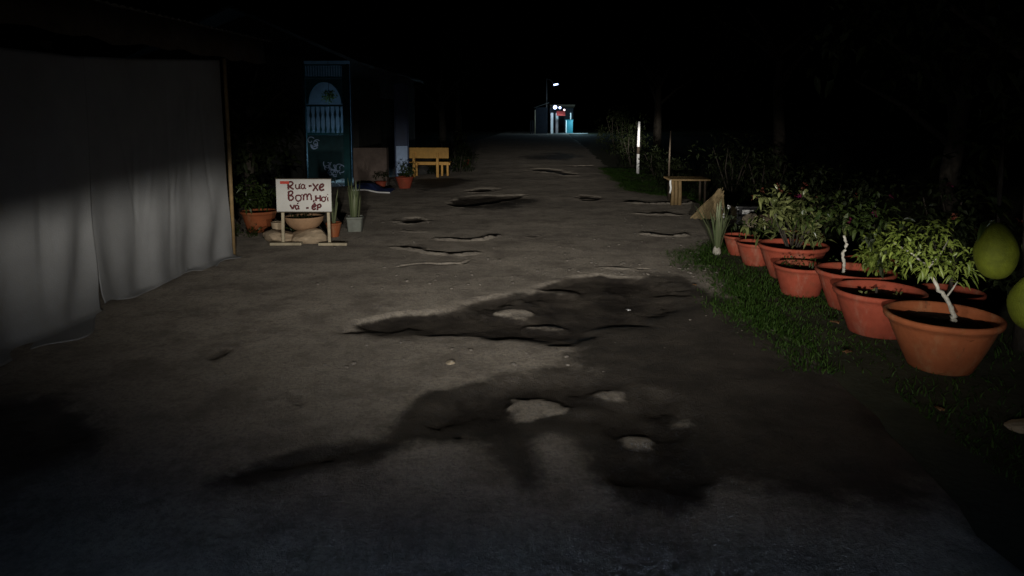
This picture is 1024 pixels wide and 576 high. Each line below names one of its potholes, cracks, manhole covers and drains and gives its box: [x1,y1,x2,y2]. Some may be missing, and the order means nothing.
pothole [210,369,727,512]
pothole [441,194,534,208]
pothole [326,272,703,351]
pothole [524,167,583,176]
pothole [390,216,435,225]
pothole [572,194,607,202]
